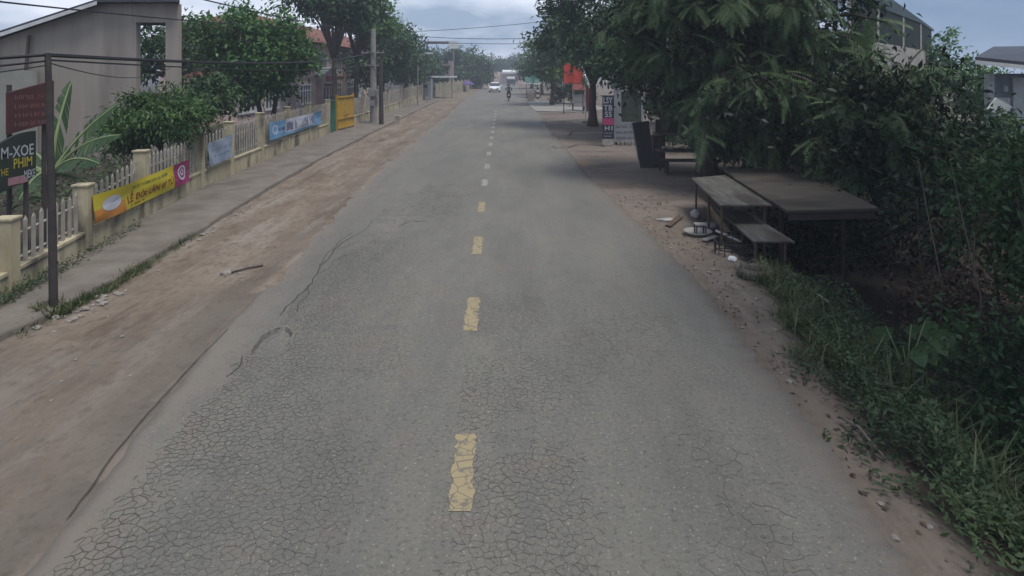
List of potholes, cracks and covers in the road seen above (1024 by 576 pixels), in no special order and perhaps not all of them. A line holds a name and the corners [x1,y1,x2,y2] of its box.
crack [438,292,611,576]
crack [53,231,436,576]
crack [280,184,471,315]
crack [560,284,816,576]
pothole [246,325,296,358]
